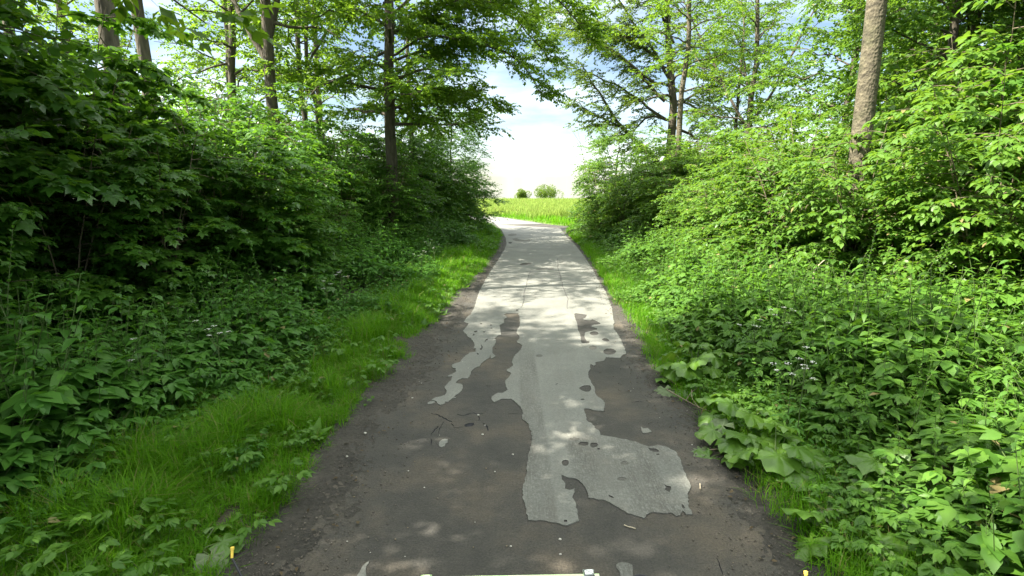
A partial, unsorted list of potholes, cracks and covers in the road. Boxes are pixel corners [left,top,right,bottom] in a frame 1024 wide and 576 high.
crack [431,413,489,445]
